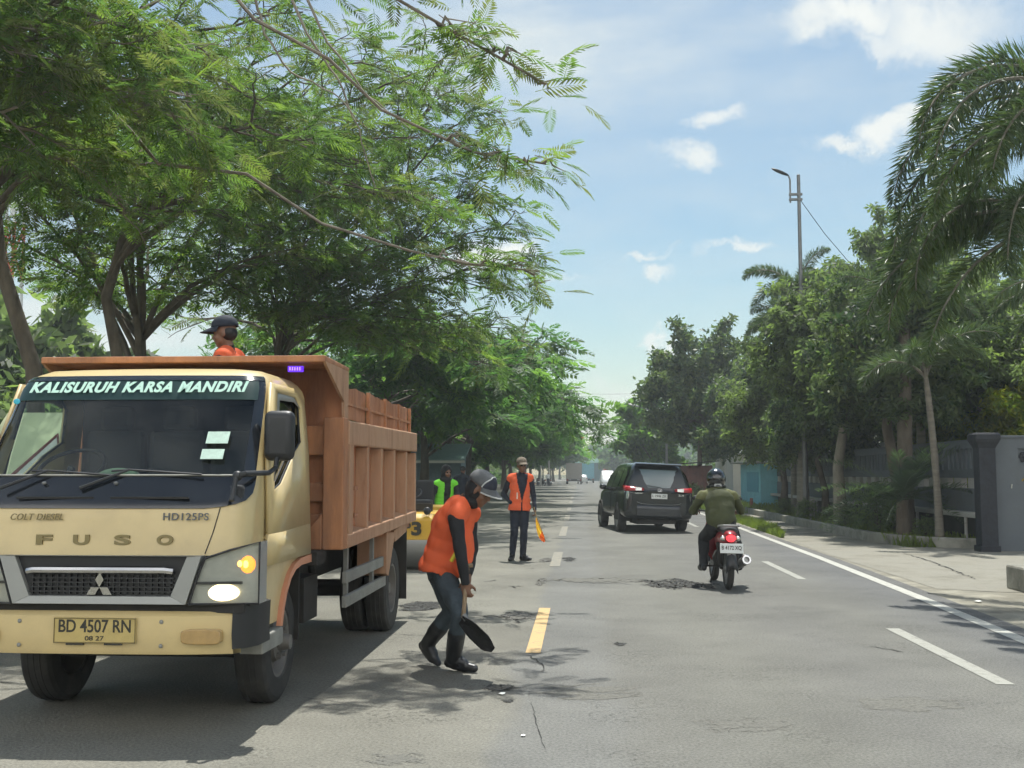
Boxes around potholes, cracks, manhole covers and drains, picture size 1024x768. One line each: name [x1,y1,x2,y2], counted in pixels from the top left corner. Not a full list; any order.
pothole [501,611,537,620]
pothole [398,601,440,611]
pothole [641,578,720,590]
